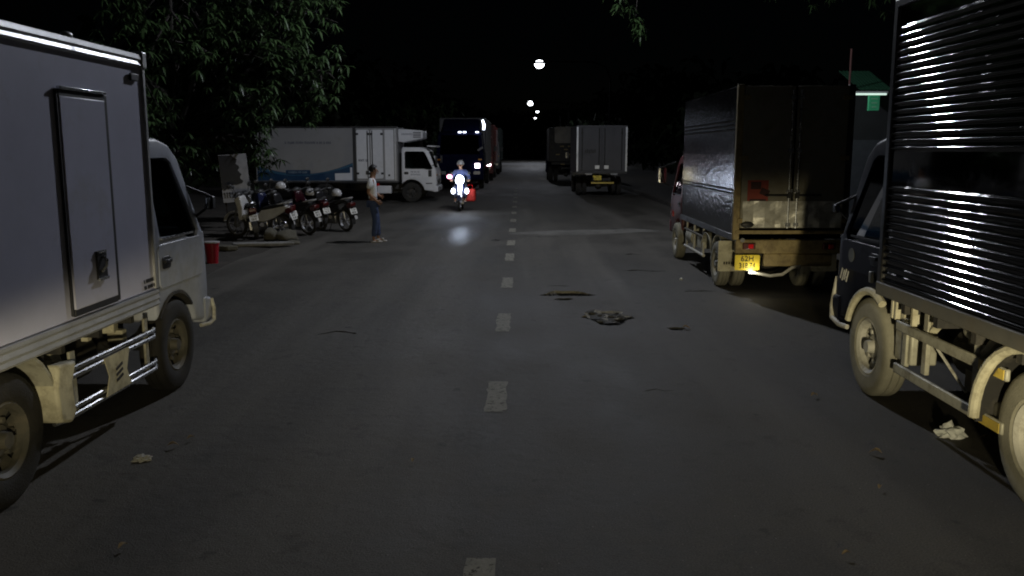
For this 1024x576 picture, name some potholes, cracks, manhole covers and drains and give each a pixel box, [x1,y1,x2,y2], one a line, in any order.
pothole [582,310,635,326]
